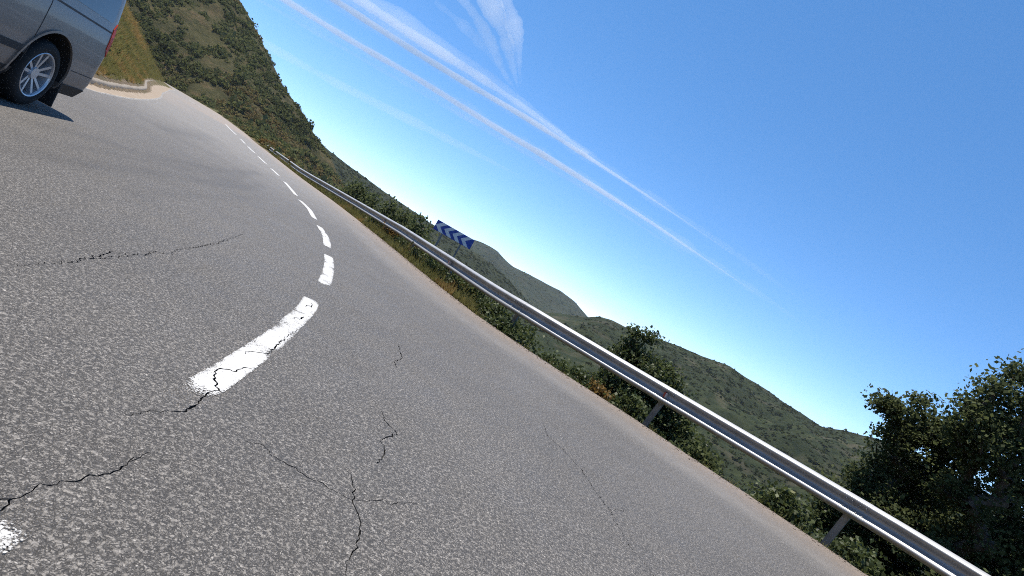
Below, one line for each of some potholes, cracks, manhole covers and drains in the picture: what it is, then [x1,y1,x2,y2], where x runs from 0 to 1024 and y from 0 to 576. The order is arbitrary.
crack [247,413,415,575]
crack [17,234,243,266]
crack [0,452,150,511]
crack [543,425,654,576]
